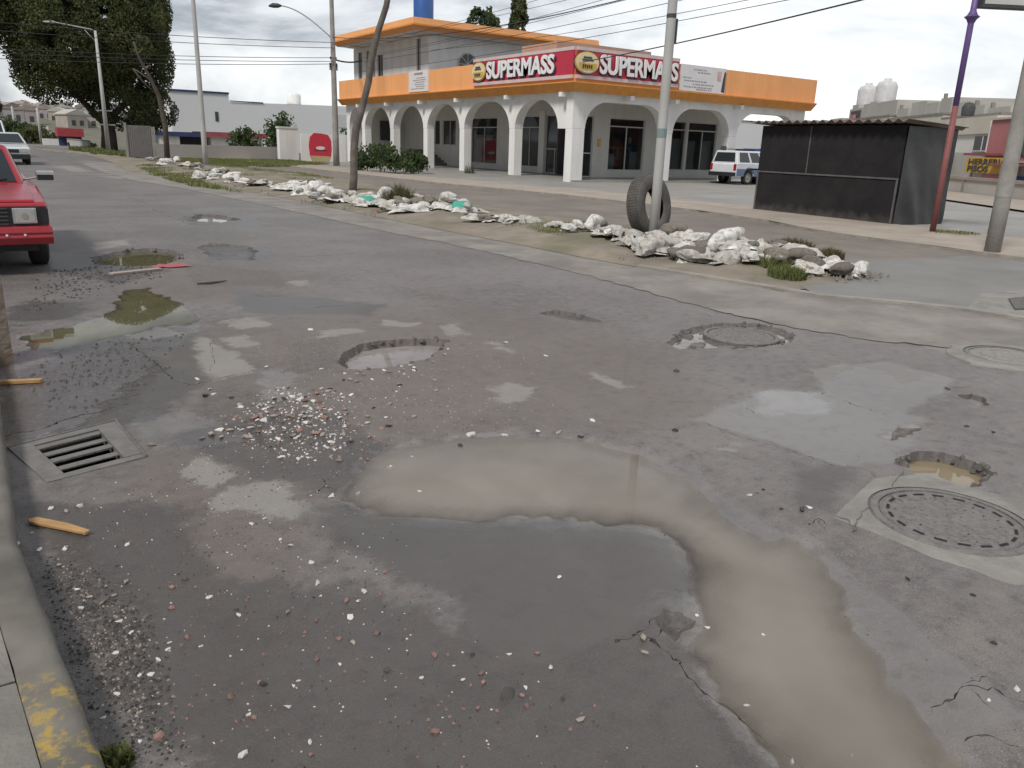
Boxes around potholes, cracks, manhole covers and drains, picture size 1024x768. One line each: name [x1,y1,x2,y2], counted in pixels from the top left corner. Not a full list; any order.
drain grate [7,419,147,483]
manhole cover [682,327,785,349]
pothole [895,451,998,487]
pothole [89,248,184,266]
manhole cover [834,469,1024,585]
pothole [540,309,602,322]
pothole [197,243,259,260]
manhole cover [945,343,1024,372]
crack [928,676,1024,748]
pothole [336,335,451,370]
crack [614,617,803,768]
pothole [188,213,243,223]
